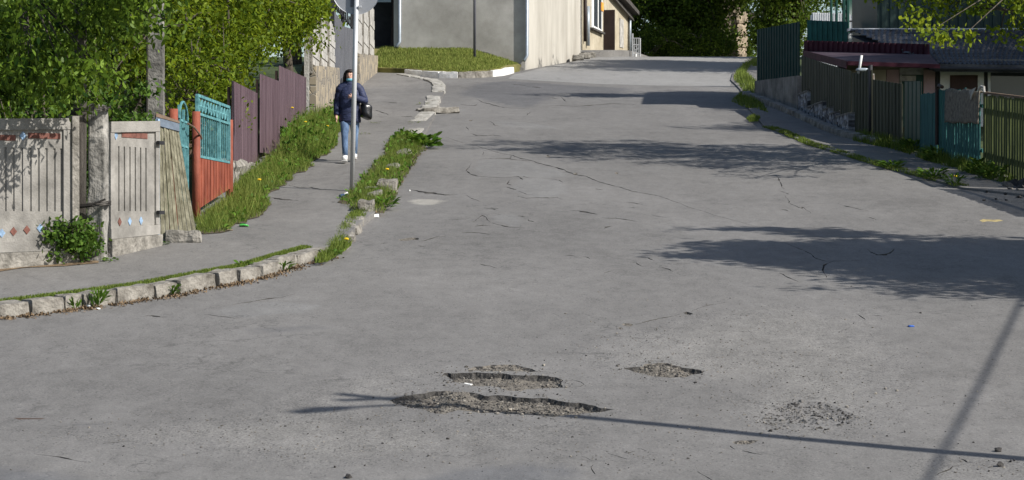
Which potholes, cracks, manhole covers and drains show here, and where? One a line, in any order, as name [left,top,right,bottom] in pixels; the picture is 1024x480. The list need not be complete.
crack [414,190,534,241]
pothole [390,391,613,417]
pothole [757,400,860,428]
pothole [624,363,704,378]
crack [460,102,763,229]
pothole [443,372,563,391]
